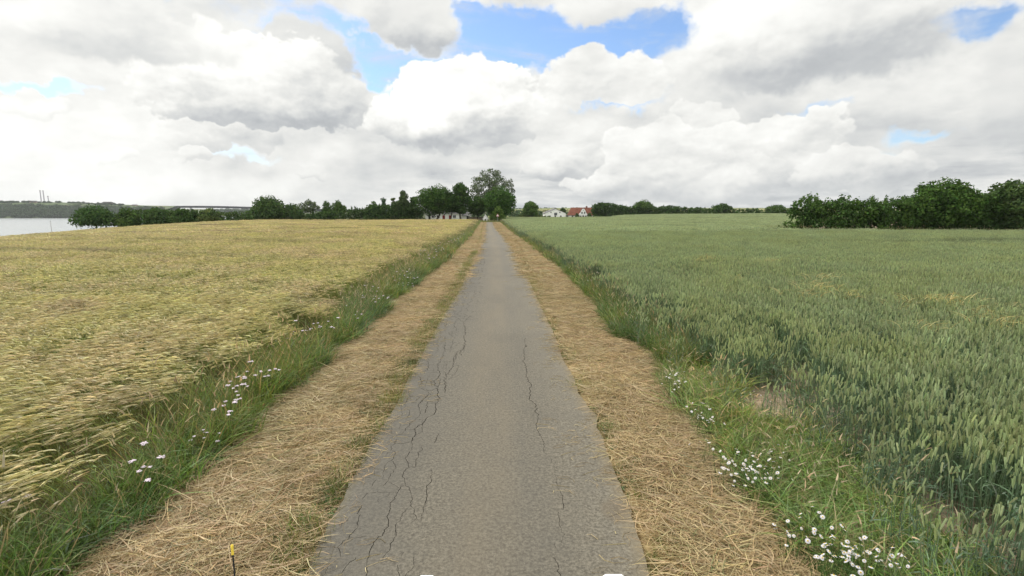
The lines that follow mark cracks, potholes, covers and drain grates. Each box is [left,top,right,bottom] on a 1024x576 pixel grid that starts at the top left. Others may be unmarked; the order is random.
crack [328,262,485,575]
crack [524,339,564,576]
